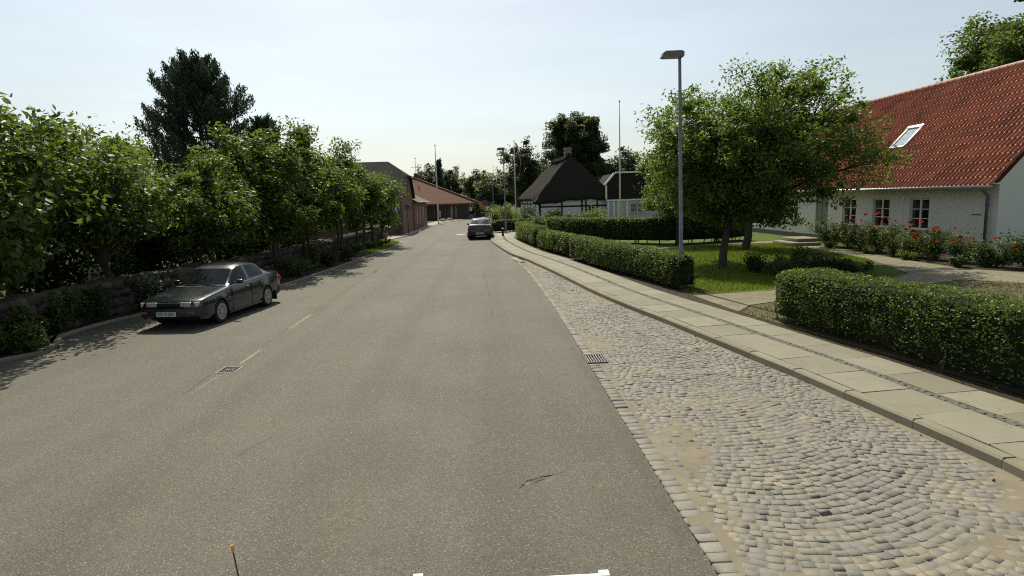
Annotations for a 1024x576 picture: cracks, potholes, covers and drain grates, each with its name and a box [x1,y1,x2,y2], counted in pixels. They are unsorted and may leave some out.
drain grate [582,354,608,364]
